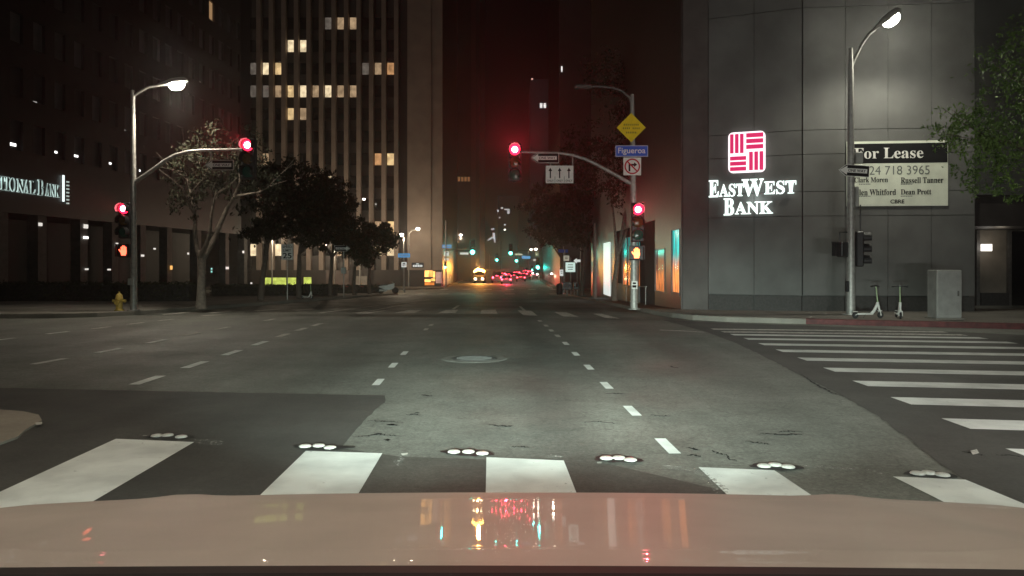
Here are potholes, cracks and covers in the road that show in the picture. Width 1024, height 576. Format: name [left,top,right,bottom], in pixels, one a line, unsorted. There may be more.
manhole cover [441,354,508,363]
crack [688,430,802,461]
crack [352,395,429,441]
